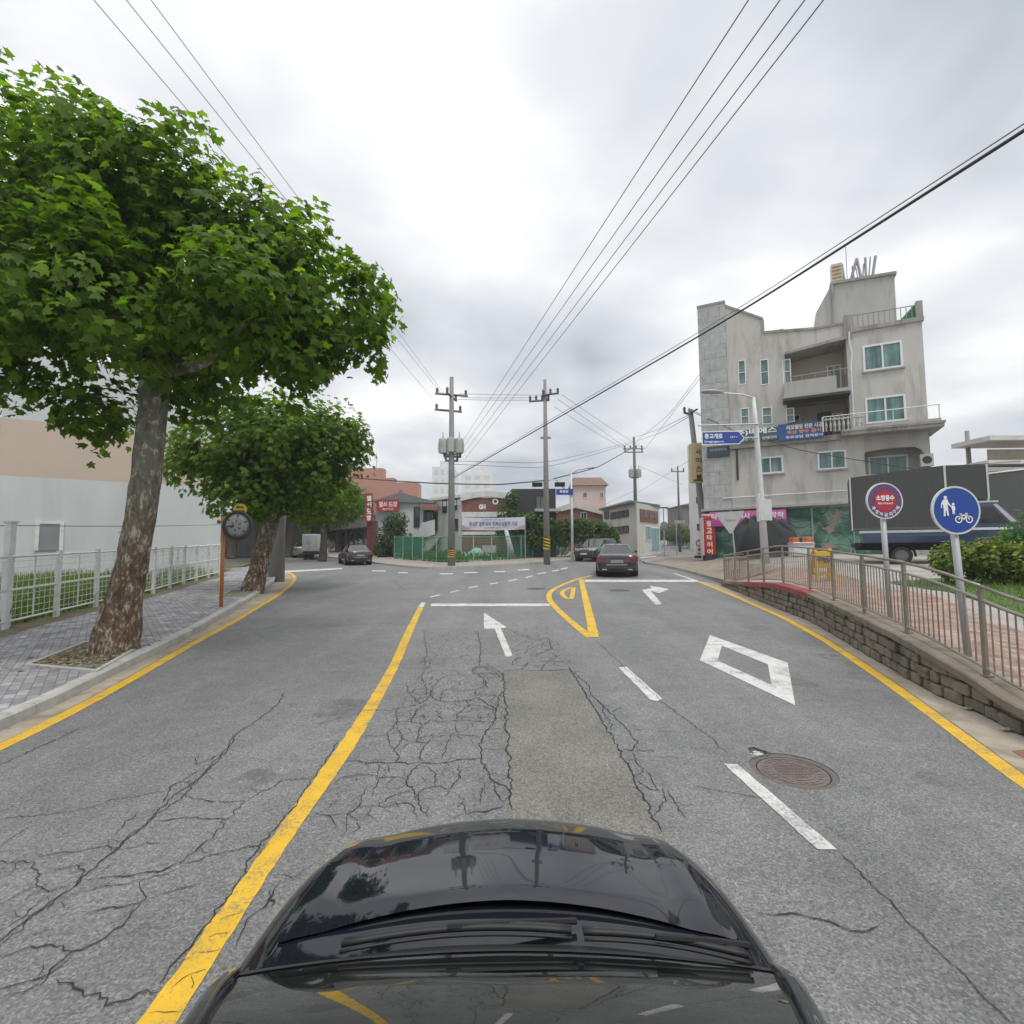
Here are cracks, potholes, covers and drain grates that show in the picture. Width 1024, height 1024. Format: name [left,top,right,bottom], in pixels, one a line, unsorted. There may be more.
manhole cover [749,754,839,790]
crack [0,627,569,1013]
crack [569,667,694,831]
crack [758,912,880,932]
